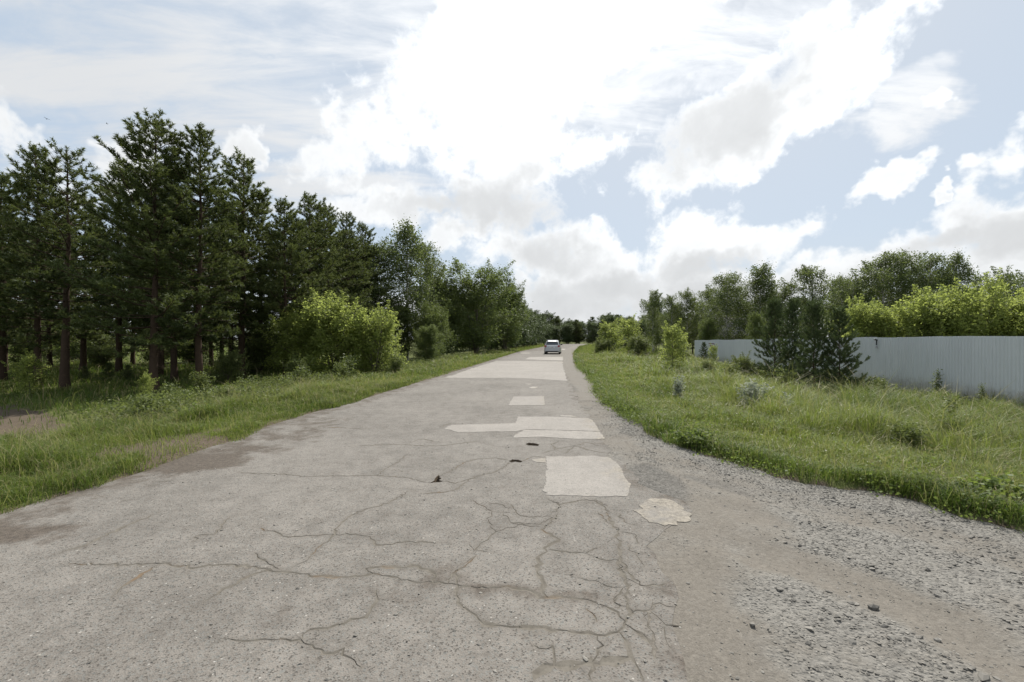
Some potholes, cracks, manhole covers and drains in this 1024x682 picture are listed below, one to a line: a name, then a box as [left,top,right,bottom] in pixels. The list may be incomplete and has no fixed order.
crack [61,423,681,681]
